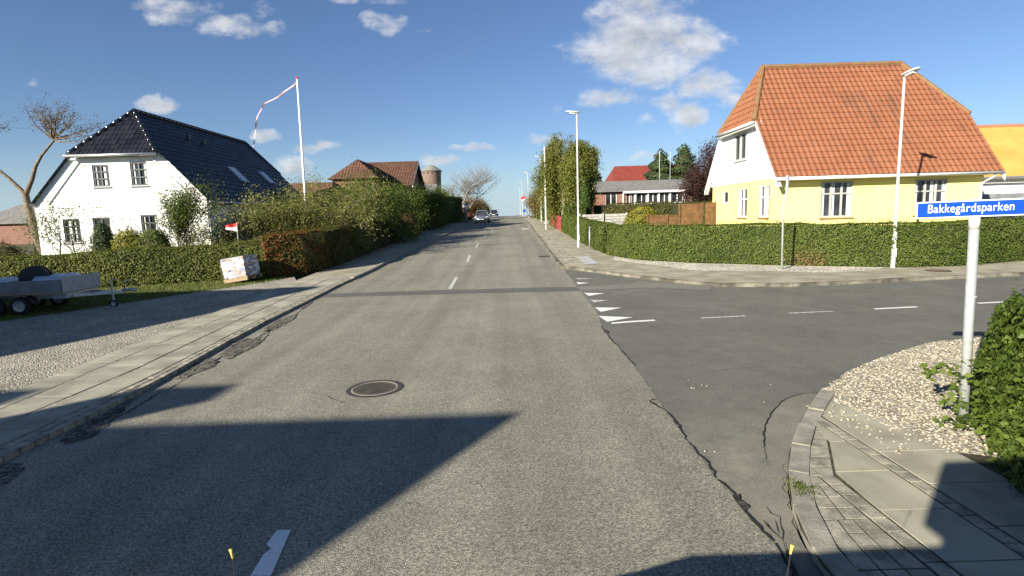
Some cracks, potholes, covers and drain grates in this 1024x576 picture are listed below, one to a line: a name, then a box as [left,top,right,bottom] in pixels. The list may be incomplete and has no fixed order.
manhole cover [346,380,404,398]
crack [649,399,799,576]
